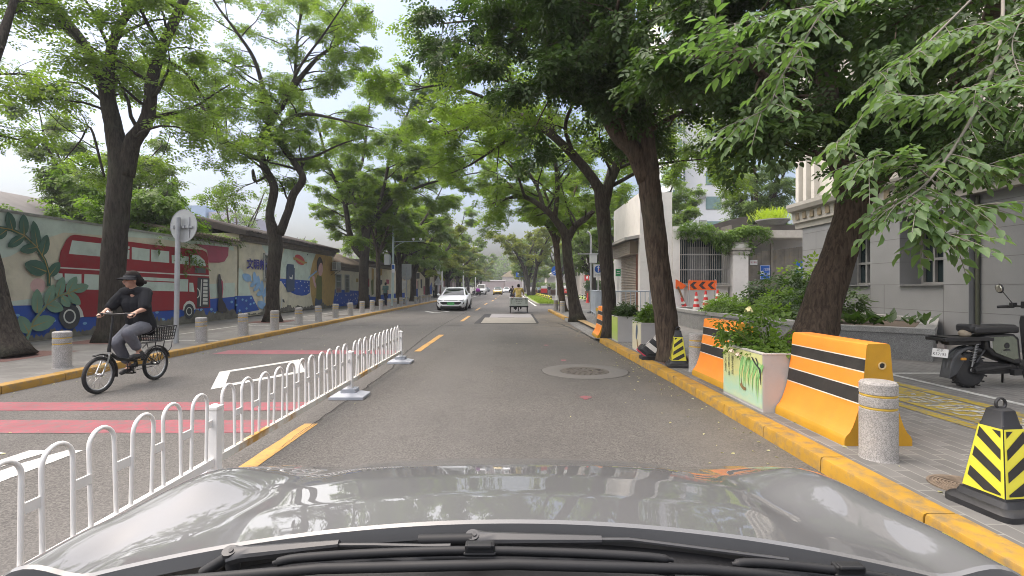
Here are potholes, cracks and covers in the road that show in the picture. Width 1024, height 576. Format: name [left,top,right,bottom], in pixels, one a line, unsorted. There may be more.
manhole cover [541,364,630,379]
manhole cover [926,474,963,491]
